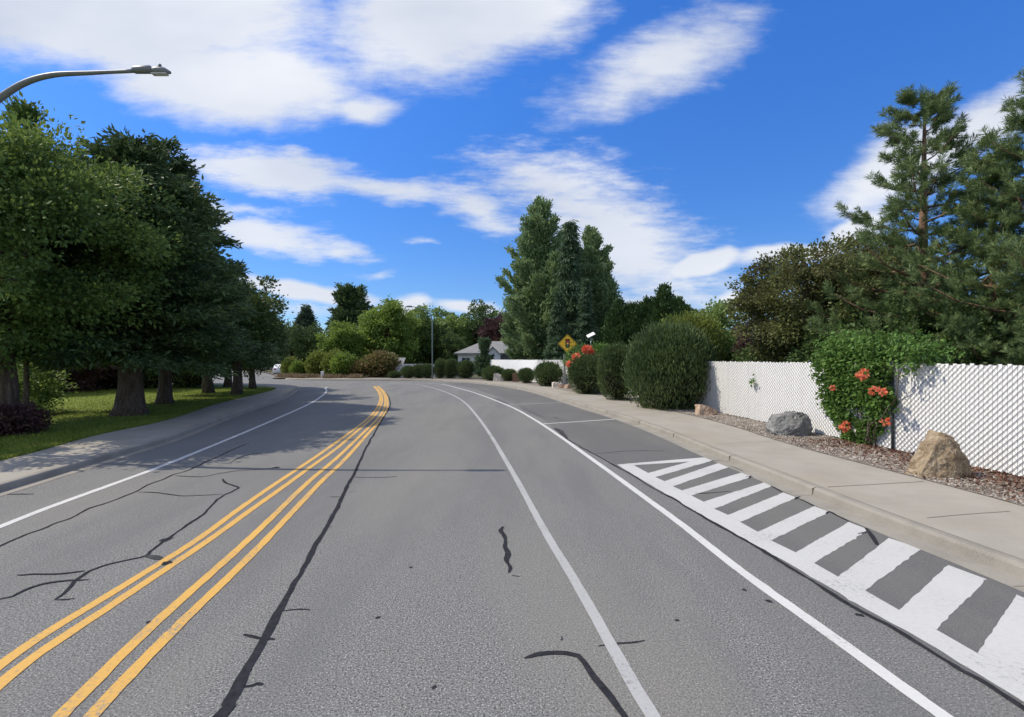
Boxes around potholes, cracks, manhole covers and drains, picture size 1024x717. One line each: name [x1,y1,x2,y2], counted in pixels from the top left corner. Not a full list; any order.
crack [498,526,516,576]
crack [0,443,269,600]
